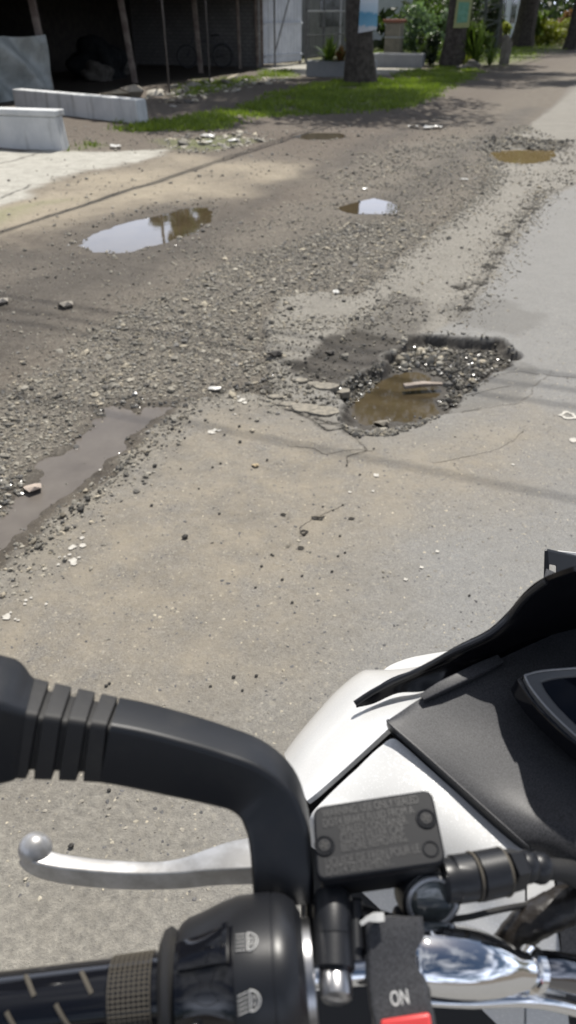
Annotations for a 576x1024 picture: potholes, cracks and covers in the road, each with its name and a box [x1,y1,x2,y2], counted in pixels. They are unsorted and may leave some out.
pothole [0,373,273,560]
crack [259,399,367,464]
pothole [336,198,403,215]
pothole [324,330,527,437]
pothole [50,197,231,264]
pothole [476,135,575,164]
